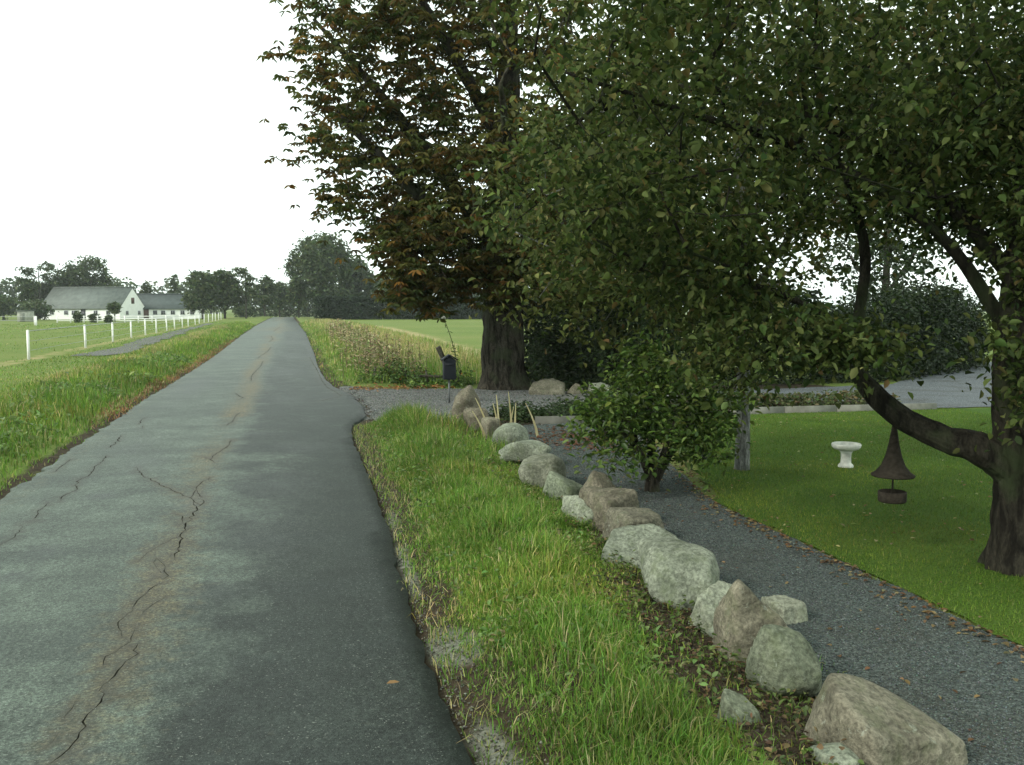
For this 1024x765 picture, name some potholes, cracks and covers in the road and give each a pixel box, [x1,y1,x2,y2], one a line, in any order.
crack [51,468,209,763]
crack [4,435,121,543]
